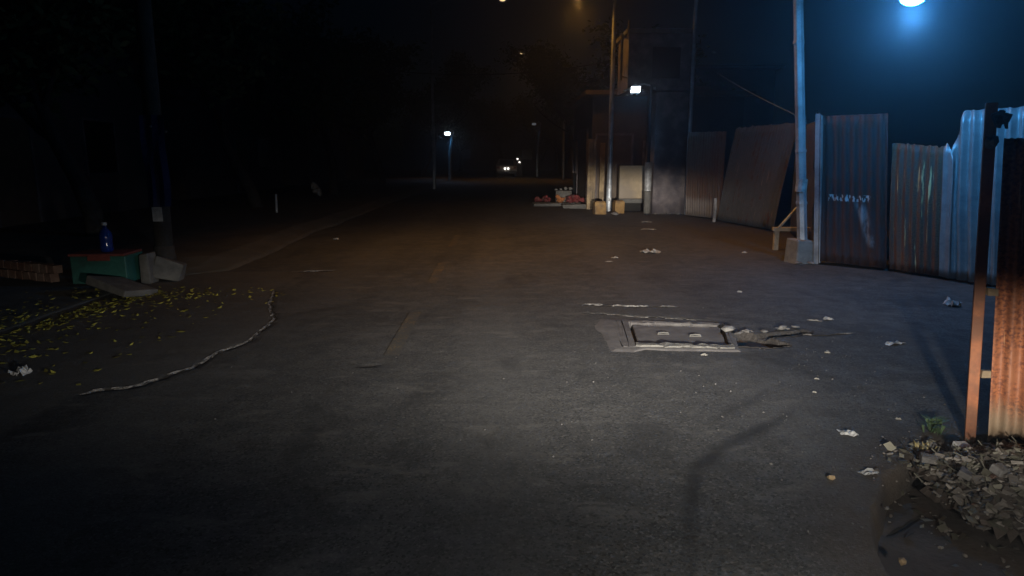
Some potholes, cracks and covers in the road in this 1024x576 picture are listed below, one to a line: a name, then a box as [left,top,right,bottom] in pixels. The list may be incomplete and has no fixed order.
pothole [730,329,814,349]
crack [77,290,277,396]
manhole cover [595,319,741,352]
